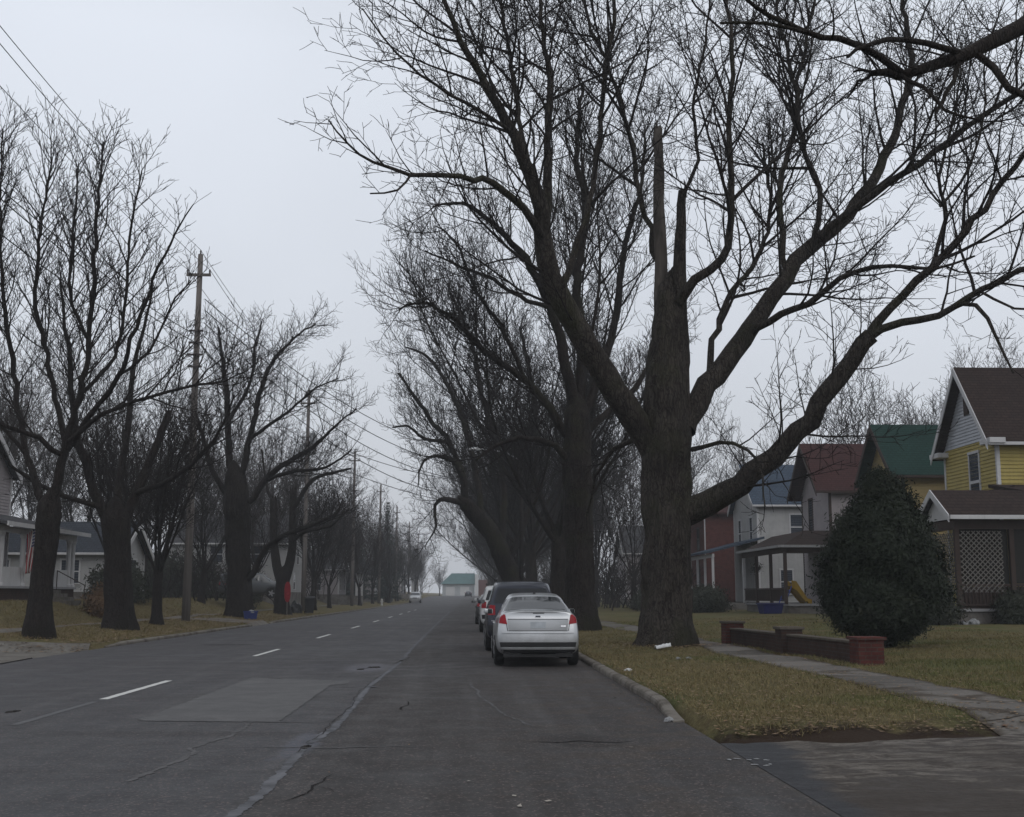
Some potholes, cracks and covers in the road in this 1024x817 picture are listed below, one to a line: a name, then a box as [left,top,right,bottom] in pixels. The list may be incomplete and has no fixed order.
crack [283,775,332,802]
crack [126,722,320,782]
crack [468,683,627,743]
